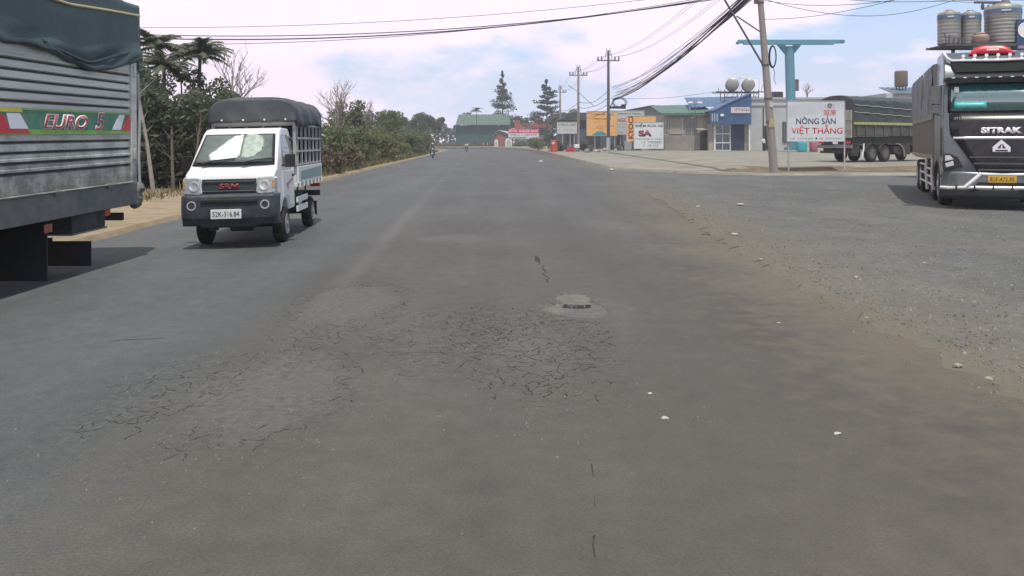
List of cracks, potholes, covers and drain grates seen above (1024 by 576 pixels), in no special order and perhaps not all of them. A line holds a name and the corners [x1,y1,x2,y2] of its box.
crack [271,282,625,414]
crack [76,345,364,463]
